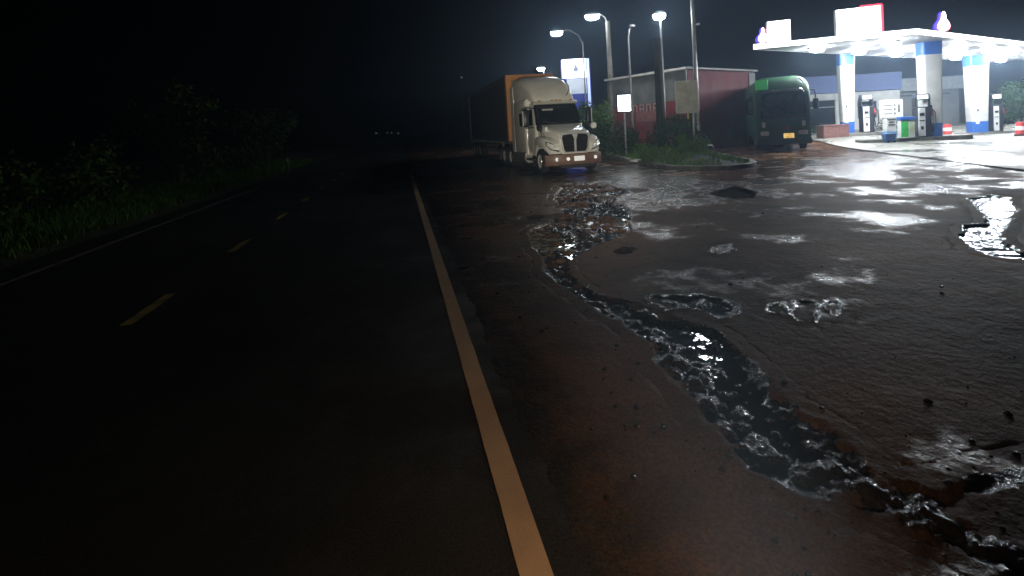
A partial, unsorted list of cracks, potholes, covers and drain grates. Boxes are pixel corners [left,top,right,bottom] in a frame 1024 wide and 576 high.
pothole [517,183,1024,576]
